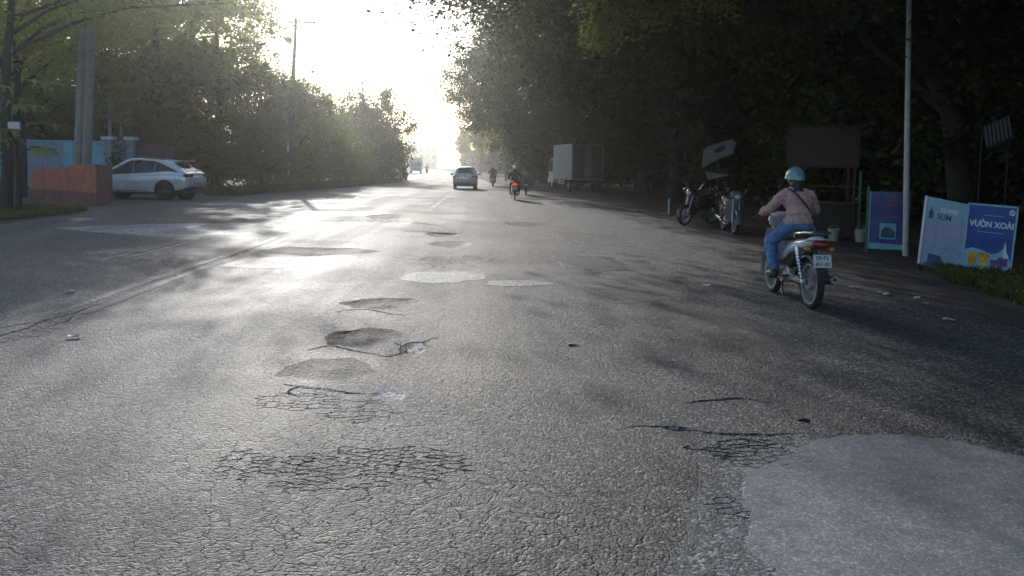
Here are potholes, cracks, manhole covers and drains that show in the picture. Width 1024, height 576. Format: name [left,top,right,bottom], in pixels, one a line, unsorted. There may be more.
pothole [339,298,419,310]
crack [212,445,476,491]
crack [630,425,807,469]
crack [687,397,770,405]
crack [0,304,100,343]
pothole [325,328,405,348]
pothole [274,357,378,381]
crack [252,384,402,422]
pothole [258,247,380,256]
